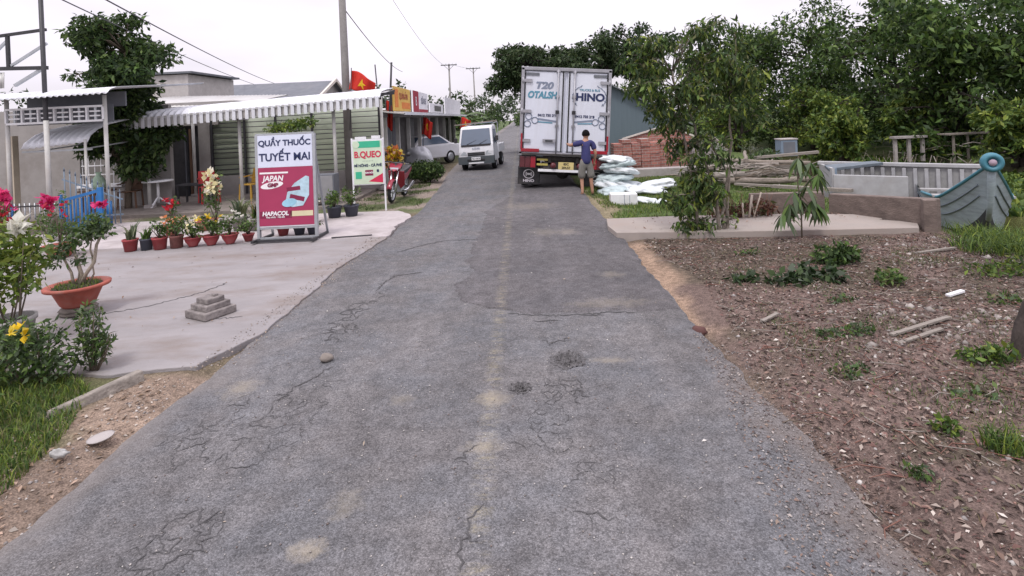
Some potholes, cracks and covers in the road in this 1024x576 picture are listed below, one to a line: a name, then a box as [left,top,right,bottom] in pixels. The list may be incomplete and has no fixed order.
crack [158,366,338,474]
crack [119,508,225,576]
pothole [550,350,586,370]
crack [456,503,484,571]
crack [324,271,424,343]
pothole [507,381,532,394]
crack [502,378,617,486]
